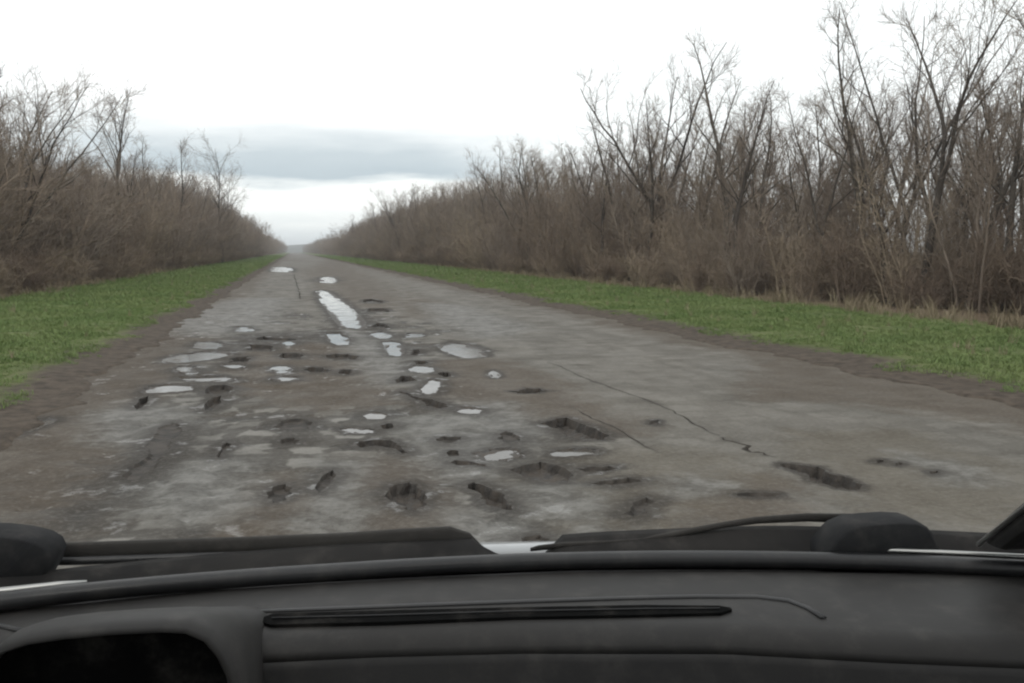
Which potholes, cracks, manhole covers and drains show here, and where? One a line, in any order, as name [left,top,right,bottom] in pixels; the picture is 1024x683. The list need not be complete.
pothole [540,418,609,440]
pothole [471,447,527,461]
pothole [315,290,367,330]
pothole [267,484,293,503]
pothole [509,462,574,483]
pothole [385,482,427,512]
pothole [437,342,488,359]
pothole [467,482,513,510]
pothole [780,463,862,490]
crack [572,407,660,453]
crack [722,437,773,457]
pothole [141,384,195,394]
